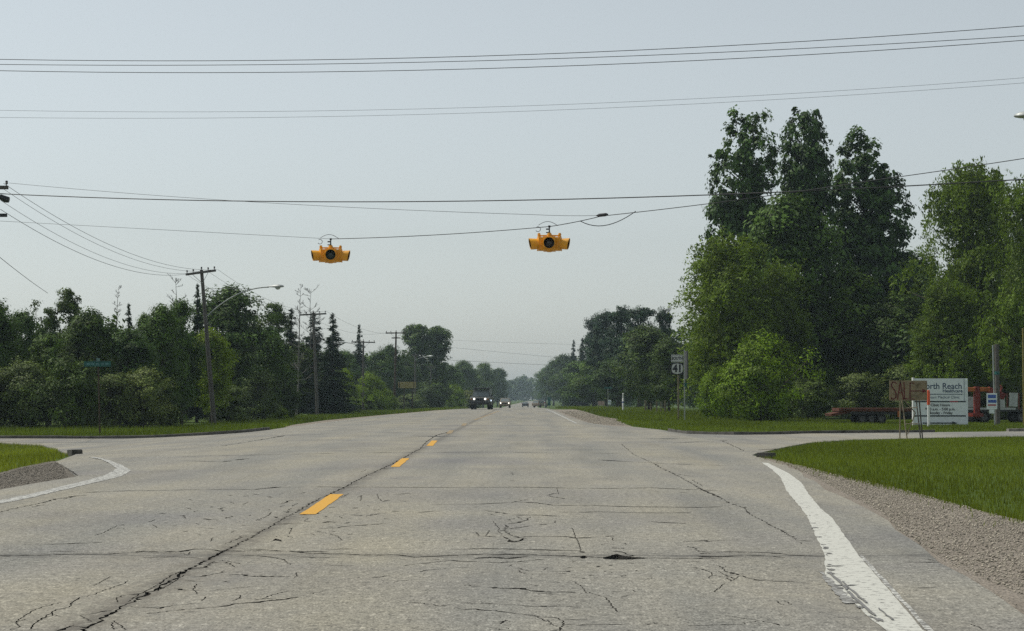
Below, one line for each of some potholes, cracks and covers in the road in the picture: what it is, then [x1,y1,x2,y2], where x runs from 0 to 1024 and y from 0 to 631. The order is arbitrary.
crack [1,471,817,631]
